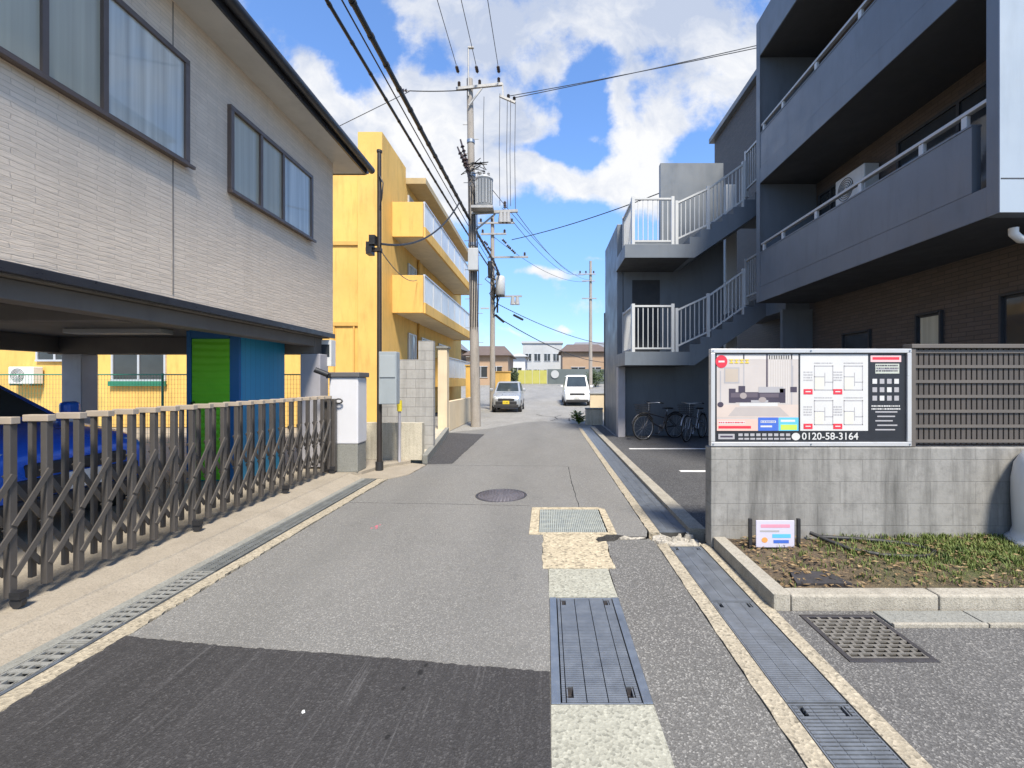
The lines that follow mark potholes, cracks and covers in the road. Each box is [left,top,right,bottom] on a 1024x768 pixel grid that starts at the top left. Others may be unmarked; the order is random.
drain grate [529,507,617,535]
drain grate [273,502,335,530]
manhole cover [475,489,527,502]
drain grate [195,529,288,572]
drain grate [323,484,367,503]
drain grate [0,644,84,692]
drain grate [60,571,215,644]
drain grate [550,597,653,705]
